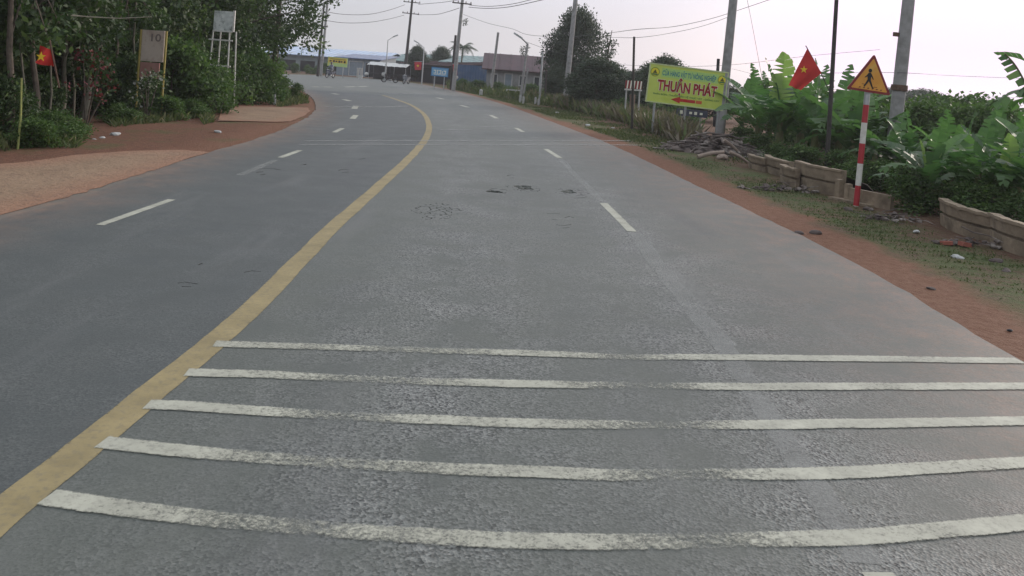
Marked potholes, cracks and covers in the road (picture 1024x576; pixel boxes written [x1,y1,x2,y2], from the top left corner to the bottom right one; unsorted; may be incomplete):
crack [414,203,461,219]
